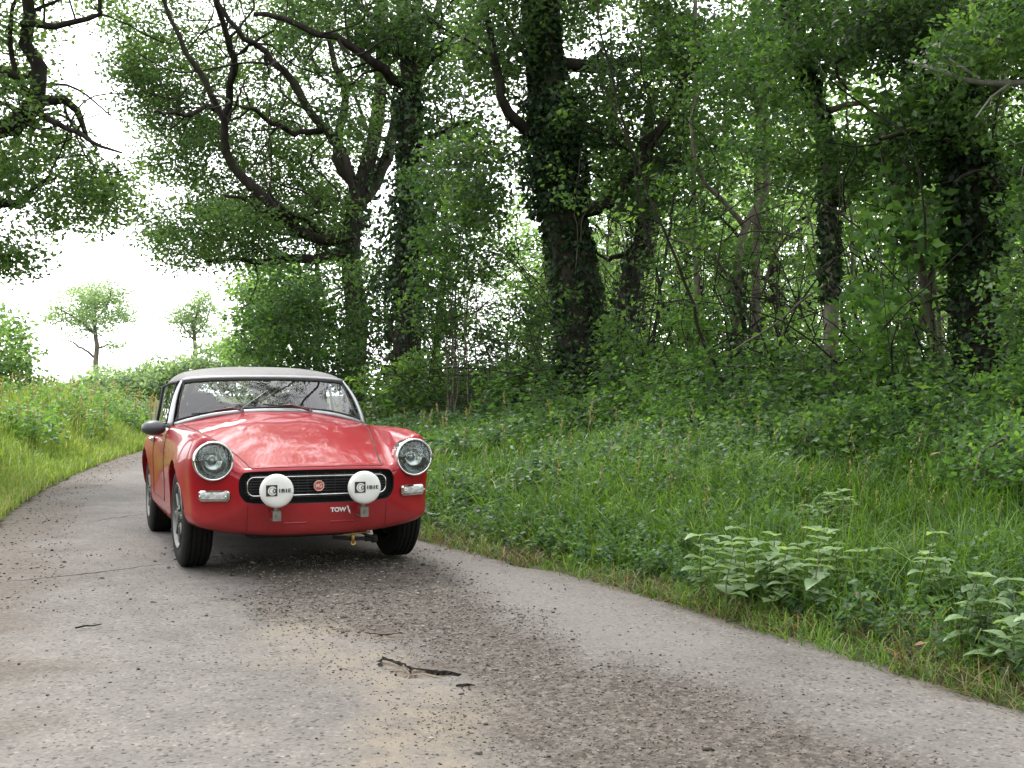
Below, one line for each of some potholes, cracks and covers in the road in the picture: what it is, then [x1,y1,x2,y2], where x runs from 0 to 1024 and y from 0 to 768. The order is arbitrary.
pothole [376,656,462,679]
crack [13,564,159,581]
